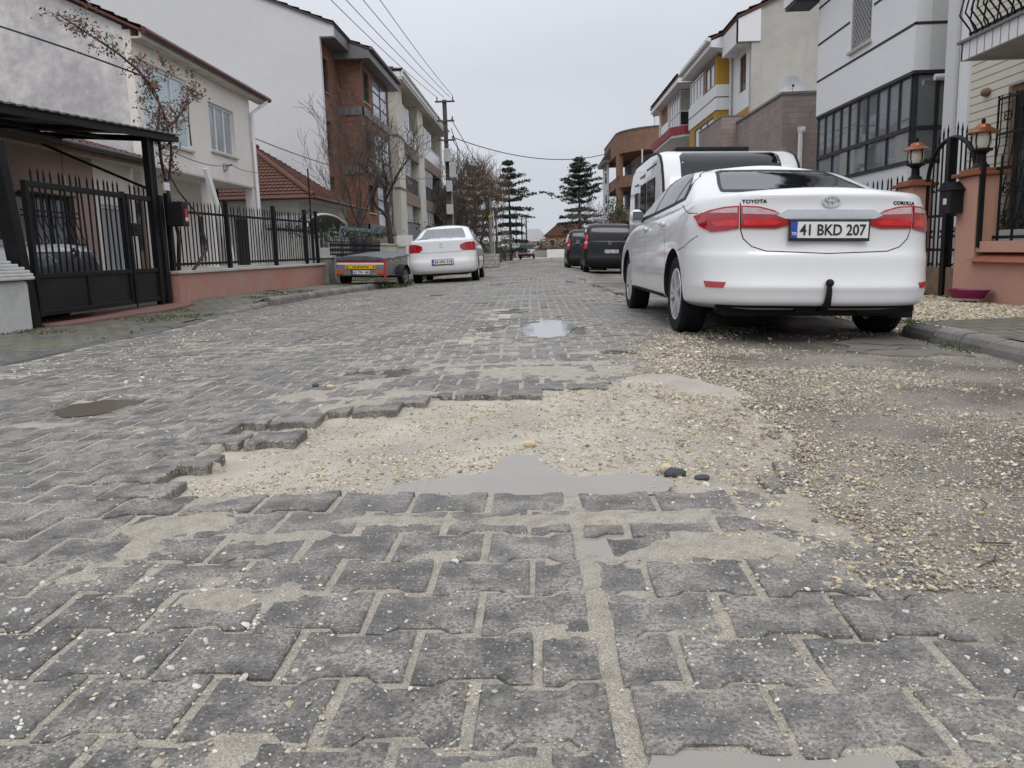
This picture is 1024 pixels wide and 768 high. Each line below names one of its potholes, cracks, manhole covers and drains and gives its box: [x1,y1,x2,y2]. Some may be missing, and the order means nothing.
pothole [169,373,797,498]
